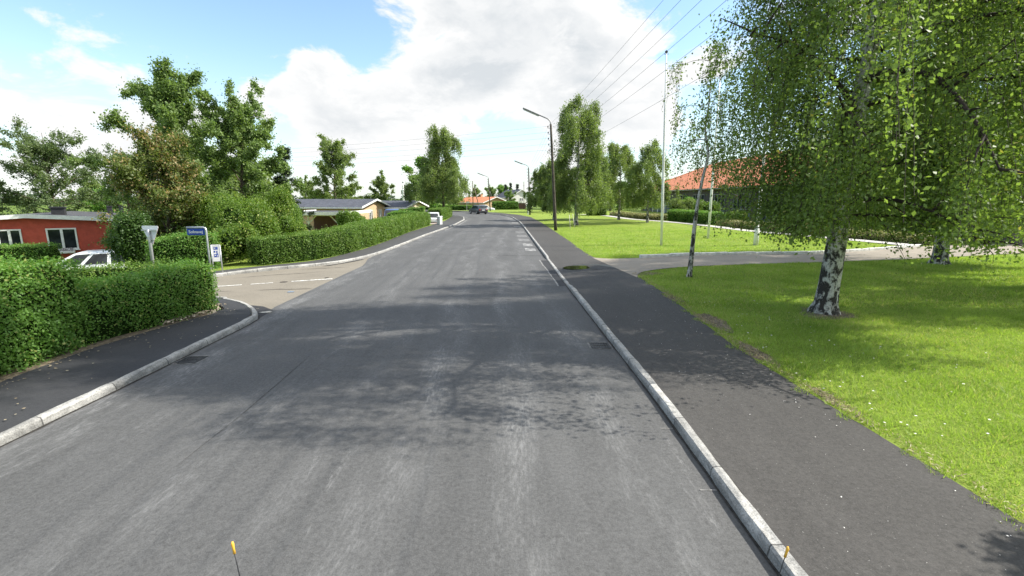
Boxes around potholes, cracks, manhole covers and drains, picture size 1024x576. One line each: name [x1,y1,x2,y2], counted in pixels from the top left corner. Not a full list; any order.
drain grate [172,355,210,364]
